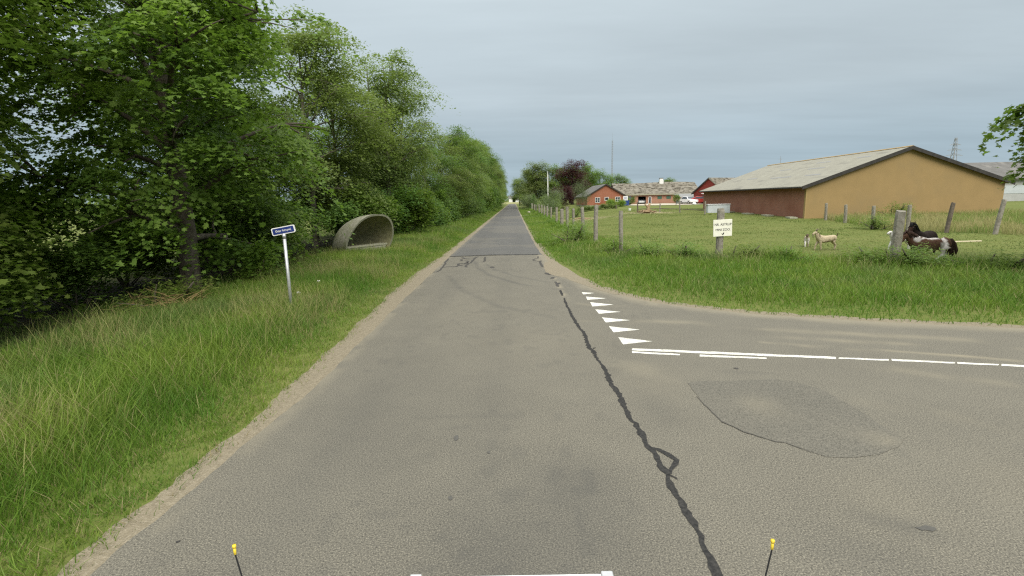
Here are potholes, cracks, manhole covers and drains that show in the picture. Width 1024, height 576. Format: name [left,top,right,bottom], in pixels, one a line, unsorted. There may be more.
crack [533,256,563,296]
crack [437,257,486,272]
